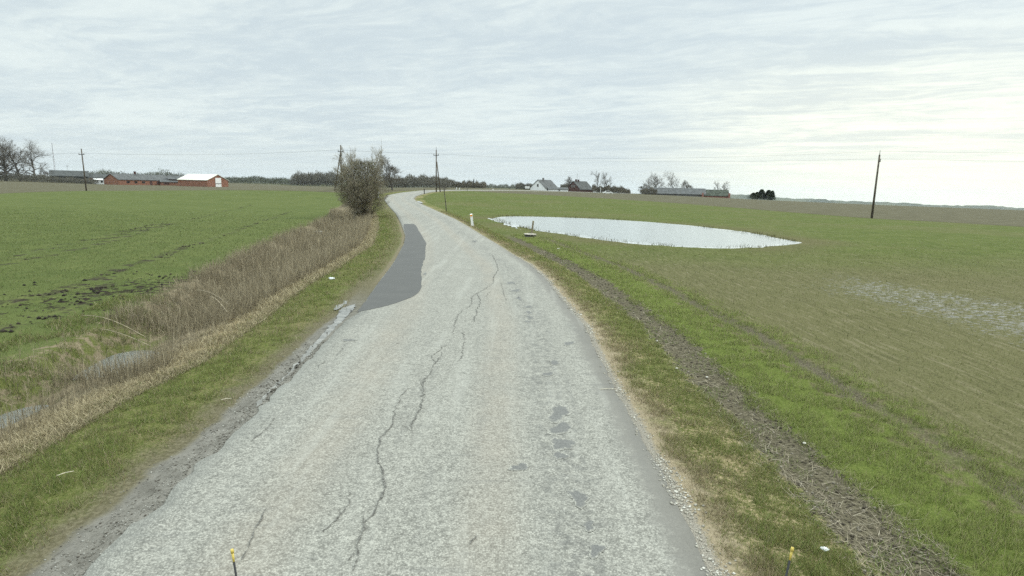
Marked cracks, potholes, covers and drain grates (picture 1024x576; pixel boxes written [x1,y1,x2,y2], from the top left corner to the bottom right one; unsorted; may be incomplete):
crack [239,507,267,563]
crack [322,255,505,572]
